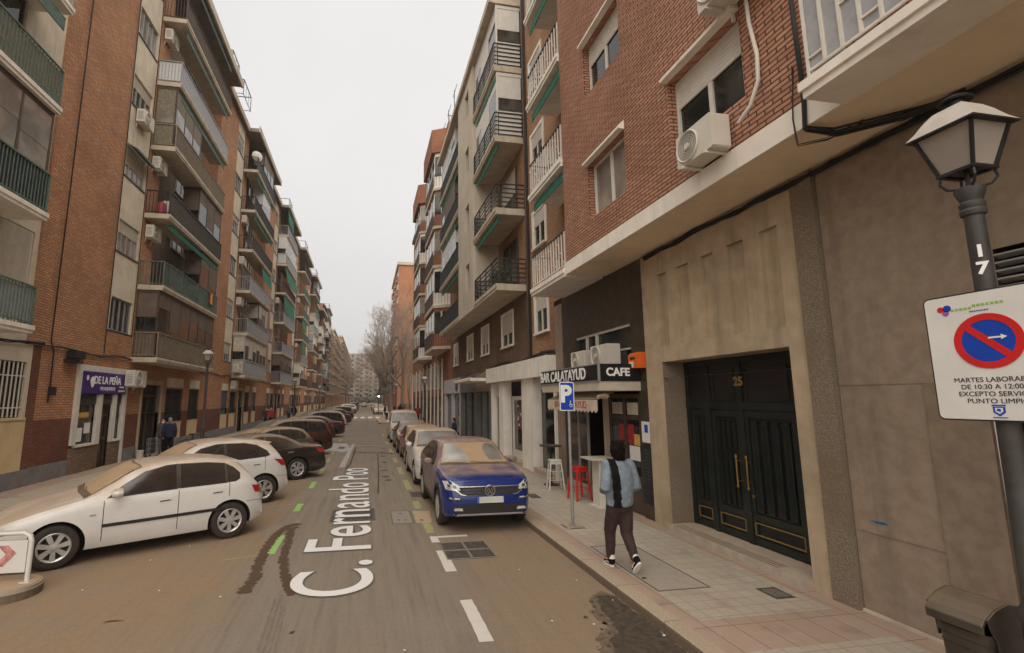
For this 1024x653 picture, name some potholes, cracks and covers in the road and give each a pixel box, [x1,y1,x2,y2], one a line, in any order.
drain grate [439,540,497,560]
utility cover [590,544,711,592]
manhole cover [755,587,796,599]
manhole cover [390,510,414,524]
